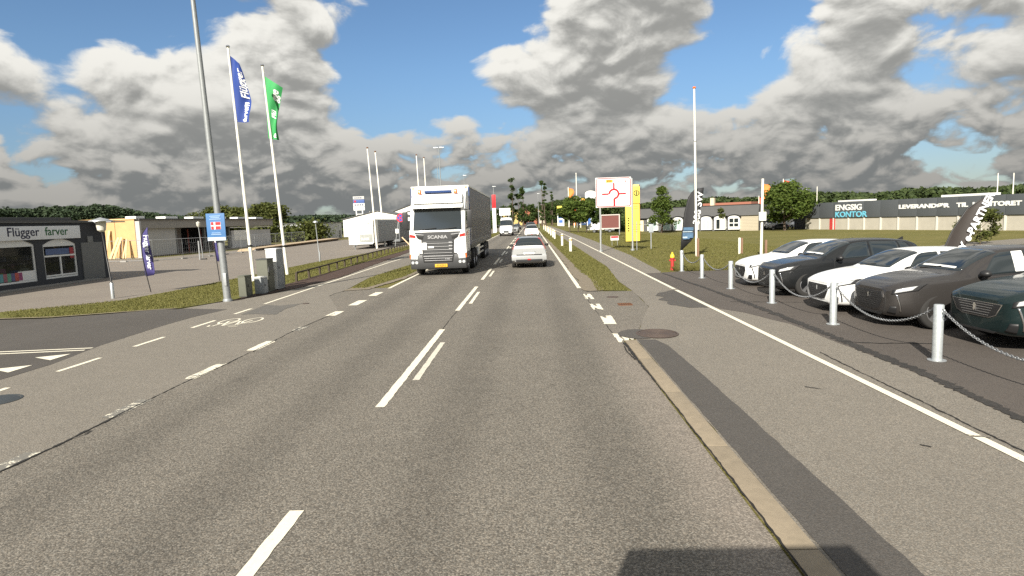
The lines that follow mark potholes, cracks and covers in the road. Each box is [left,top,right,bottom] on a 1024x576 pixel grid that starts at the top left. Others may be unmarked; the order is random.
manhole cover [0,394,24,404]
manhole cover [636,329,679,338]
